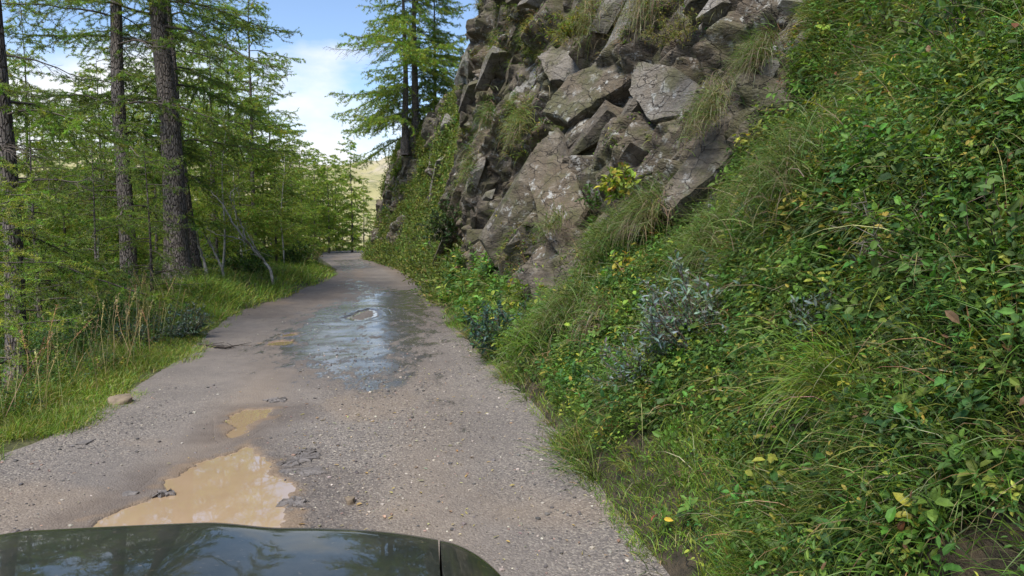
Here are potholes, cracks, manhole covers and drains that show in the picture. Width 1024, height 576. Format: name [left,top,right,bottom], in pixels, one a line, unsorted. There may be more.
pothole [63,437,319,529]
pothole [253,338,306,347]
pothole [333,307,392,322]
pothole [213,405,285,442]
